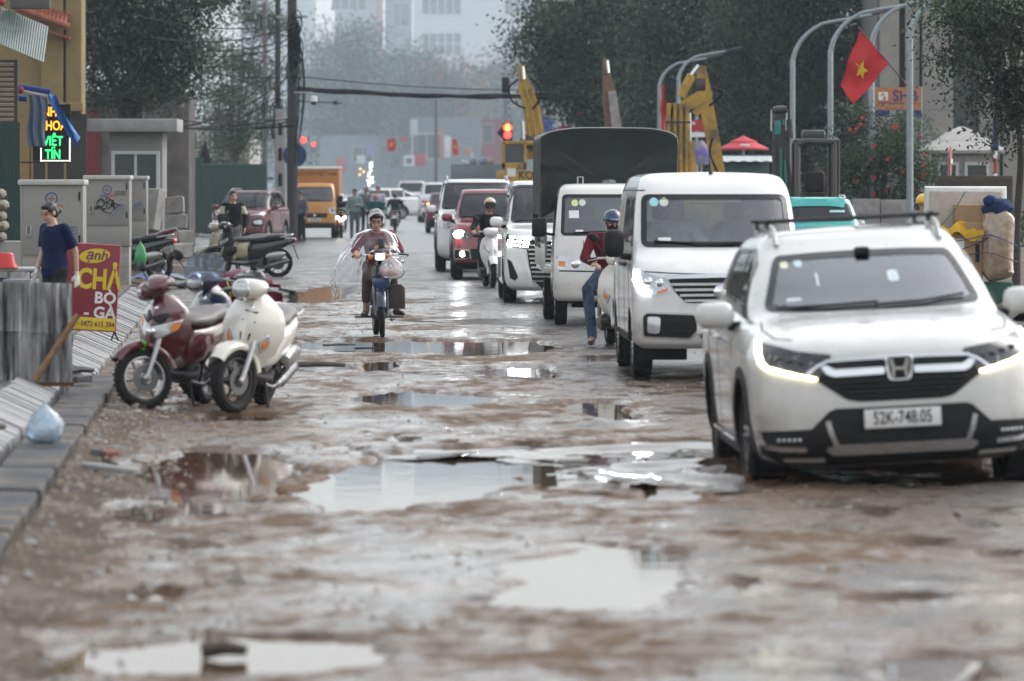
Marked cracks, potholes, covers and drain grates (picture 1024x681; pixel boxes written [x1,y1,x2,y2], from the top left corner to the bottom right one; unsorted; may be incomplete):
pothole [272,455,563,513]
pothole [438,531,724,631]
pothole [38,618,402,681]
pothole [242,430,1024,502]
pothole [538,398,652,421]
pothole [291,334,688,361]
pothole [318,389,525,409]
pothole [92,437,372,523]
